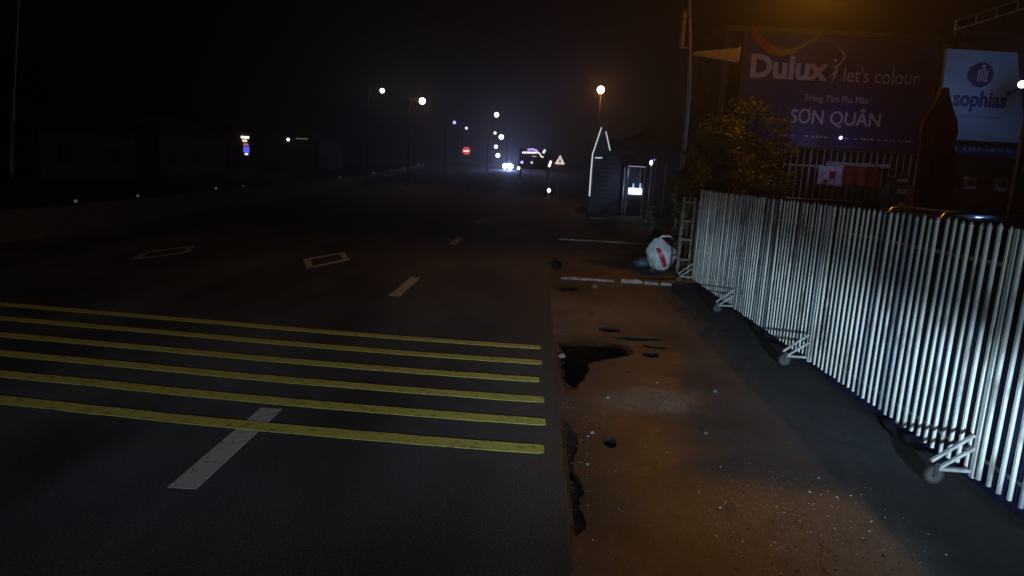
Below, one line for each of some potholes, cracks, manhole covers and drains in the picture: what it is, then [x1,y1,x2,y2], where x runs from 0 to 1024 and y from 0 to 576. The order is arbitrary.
pothole [557,342,634,390]
pothole [603,434,617,448]
